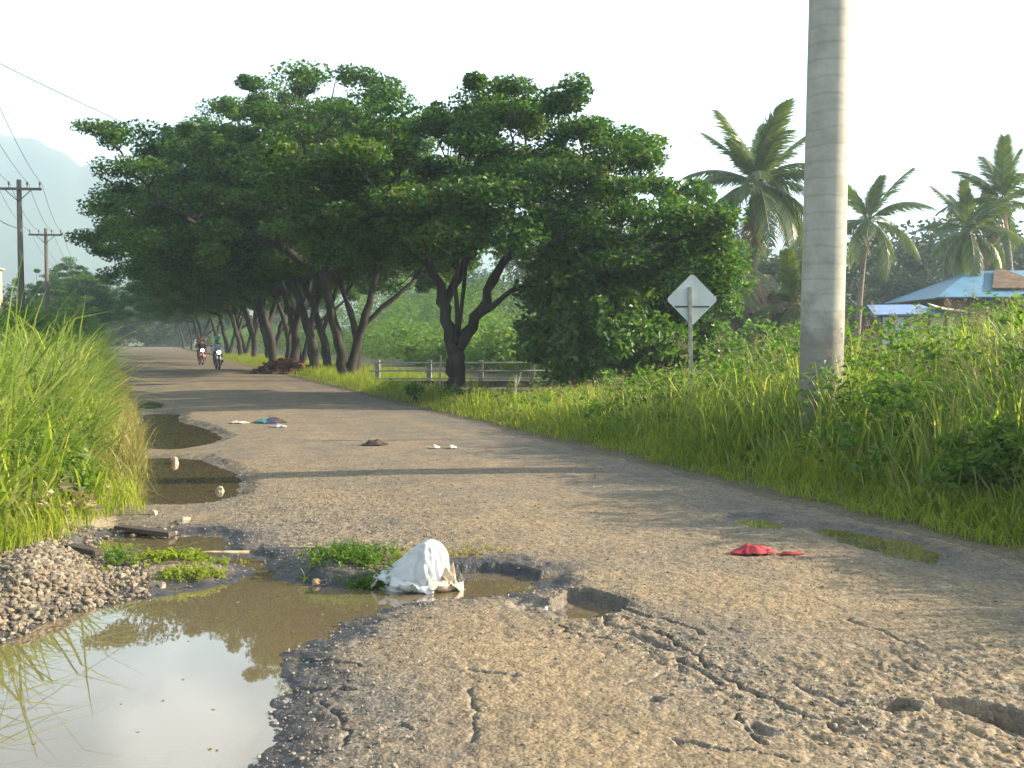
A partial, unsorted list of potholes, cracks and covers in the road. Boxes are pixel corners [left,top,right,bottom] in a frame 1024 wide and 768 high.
pothole [504,594,557,615]
crack [555,607,846,764]
pothole [801,524,956,565]
pothole [135,411,225,450]
pothole [725,515,803,529]
pothole [553,587,630,620]
crack [462,667,538,743]
pothole [125,456,248,506]
crack [843,617,932,652]
pothole [0,554,549,768]
pothole [85,532,235,559]
